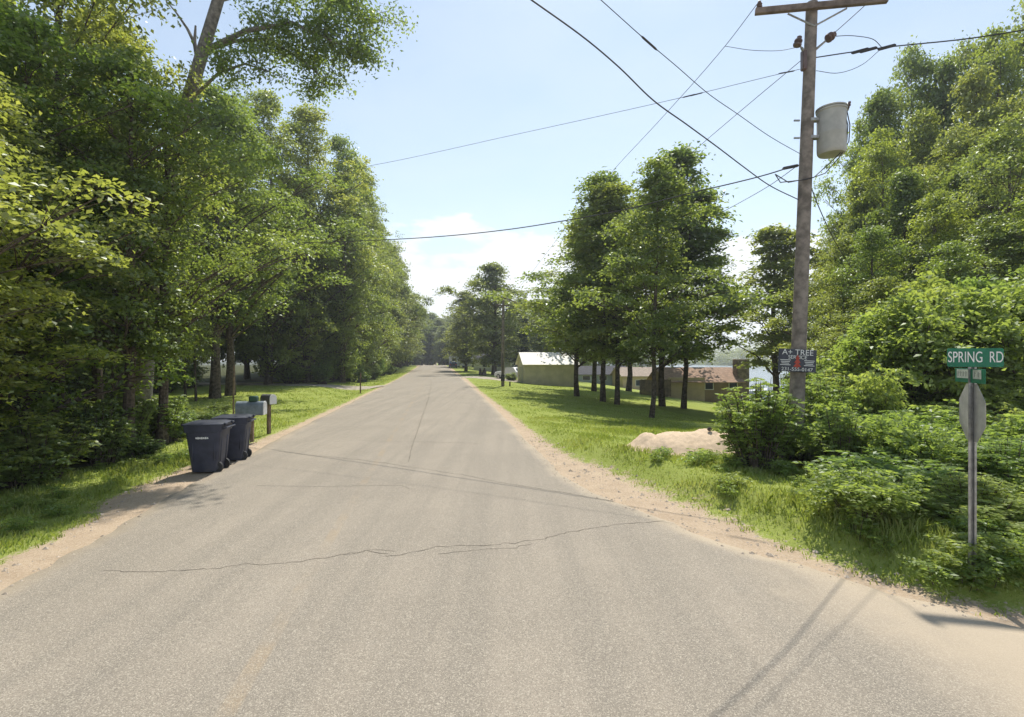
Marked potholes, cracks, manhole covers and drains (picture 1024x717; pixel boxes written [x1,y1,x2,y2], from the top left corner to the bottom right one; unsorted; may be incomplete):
crack [280,401,614,502]
crack [106,521,655,572]
